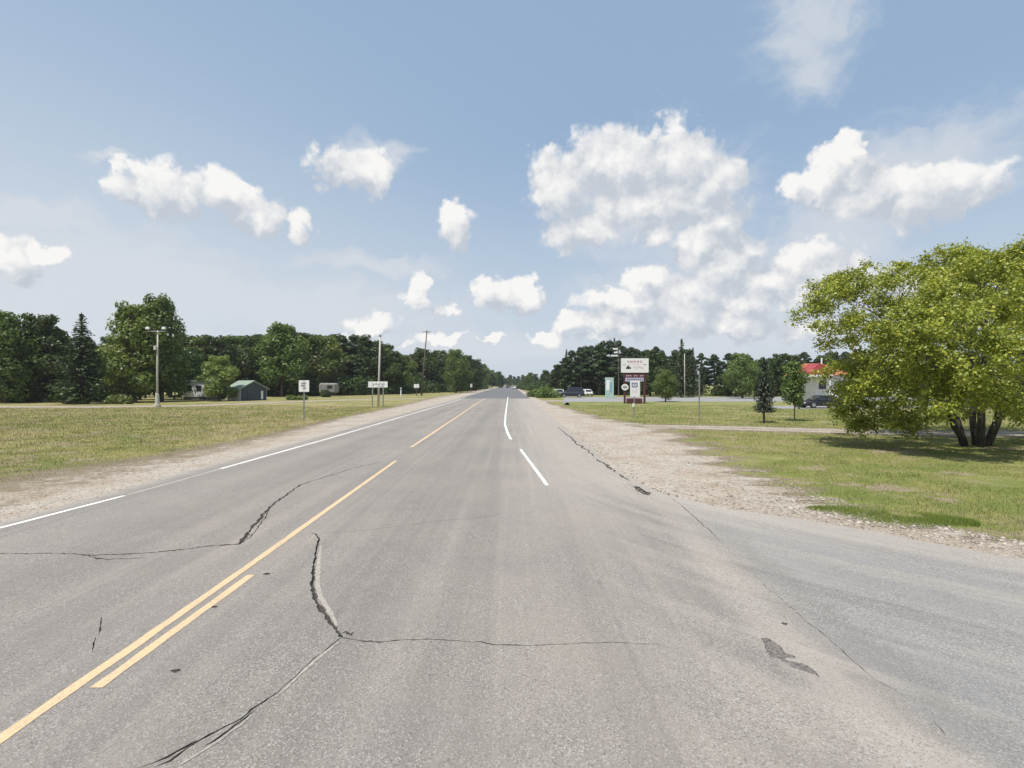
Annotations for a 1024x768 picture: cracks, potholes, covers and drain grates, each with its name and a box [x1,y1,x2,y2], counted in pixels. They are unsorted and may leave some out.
pothole [761,638,819,677]
crack [0,462,636,768]
crack [558,427,630,481]
